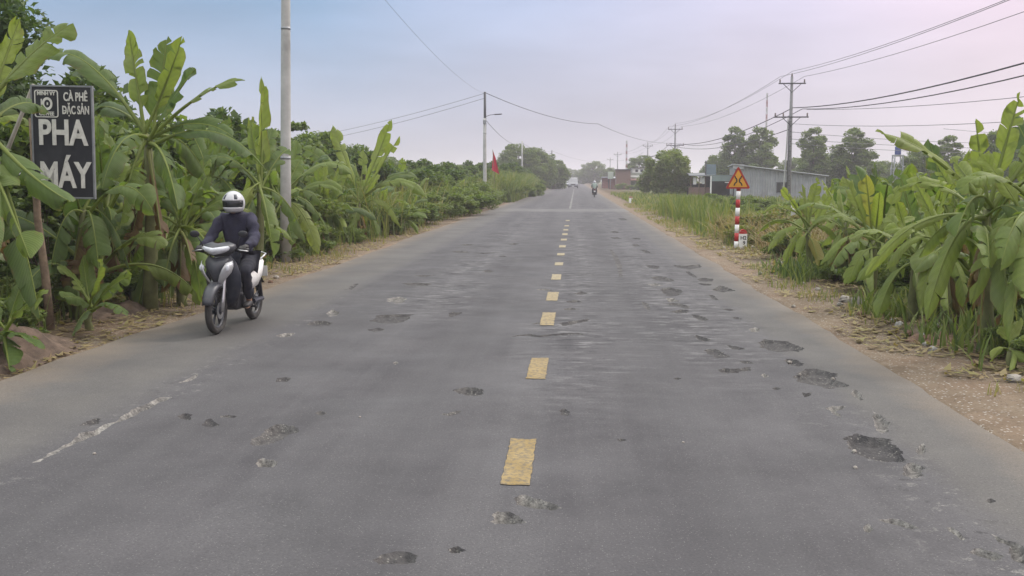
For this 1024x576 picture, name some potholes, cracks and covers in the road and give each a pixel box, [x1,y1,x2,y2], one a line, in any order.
pothole [256,458,278,467]
pothole [793,369,849,389]
pothole [843,433,908,462]
pothole [370,314,414,324]
crack [510,322,585,337]
pothole [453,387,484,396]
pothole [373,551,419,565]
pothole [490,511,527,524]
pothole [514,494,561,511]
pothole [250,424,299,446]
pothole [757,339,804,352]
